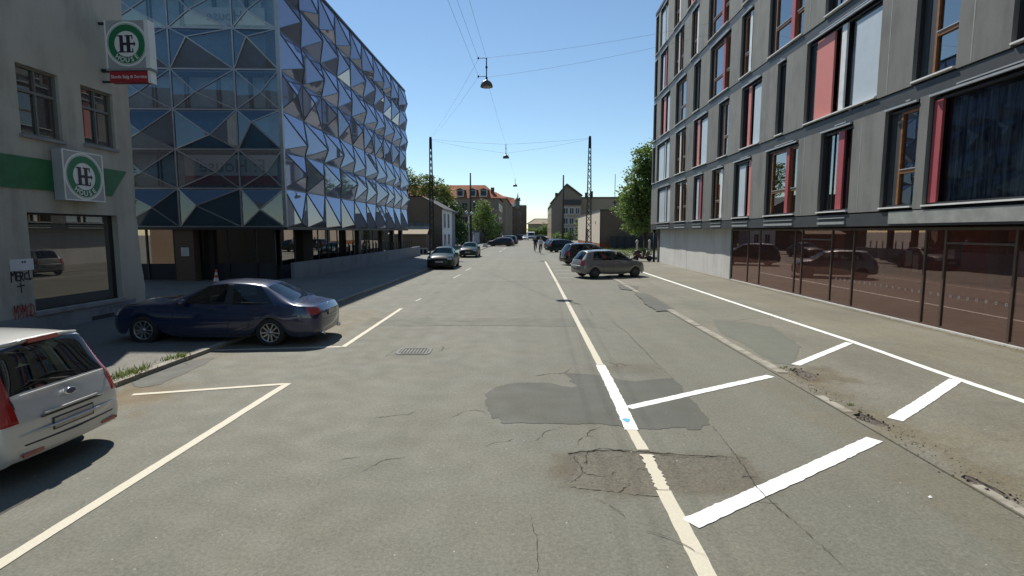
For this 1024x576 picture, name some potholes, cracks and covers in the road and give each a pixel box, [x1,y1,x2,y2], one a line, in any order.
pothole [962,475,1016,500]
crack [570,427,733,556]
pothole [790,368,819,381]
pothole [853,410,894,428]
